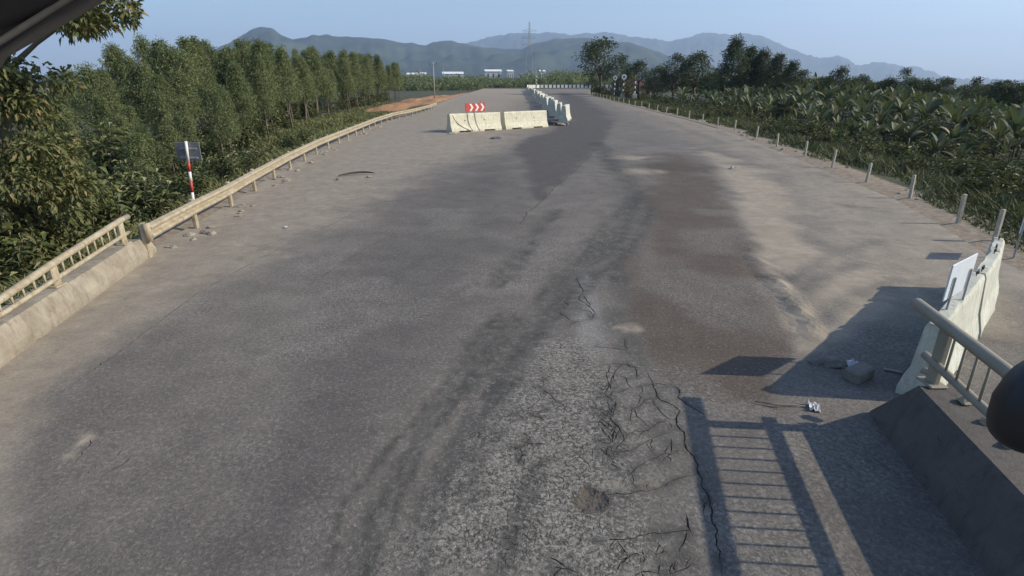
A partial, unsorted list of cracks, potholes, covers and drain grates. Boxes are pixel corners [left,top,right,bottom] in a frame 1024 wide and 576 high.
pothole [572,483,615,513]
crack [76,436,137,474]
crack [503,340,723,576]
crack [560,278,595,325]
